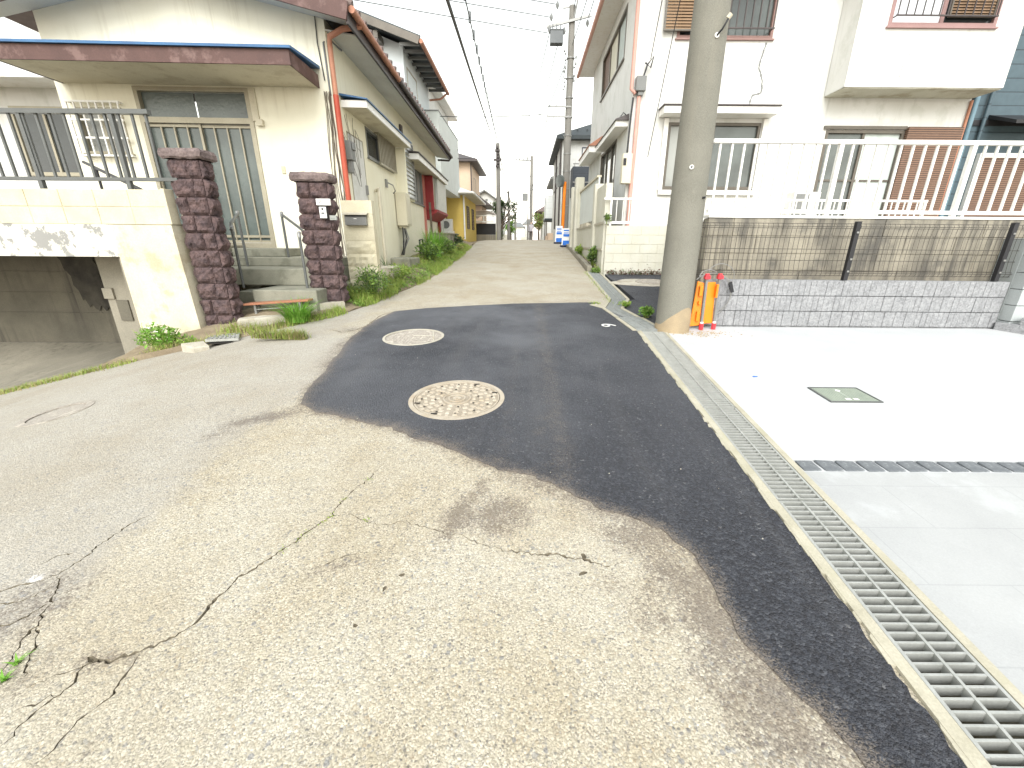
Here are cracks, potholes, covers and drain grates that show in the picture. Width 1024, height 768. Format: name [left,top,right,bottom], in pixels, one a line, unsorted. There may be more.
crack [0,470,624,763]
manhole cover [382,329,444,346]
drain grate [619,317,658,332]
manhole cover [15,400,95,427]
manhole cover [408,380,504,420]
drain grate [602,288,626,300]
drain grate [606,299,625,309]
utility cover [807,387,884,403]
drain grate [608,309,635,317]
drain grate [642,331,690,360]
drain grate [665,360,735,408]
